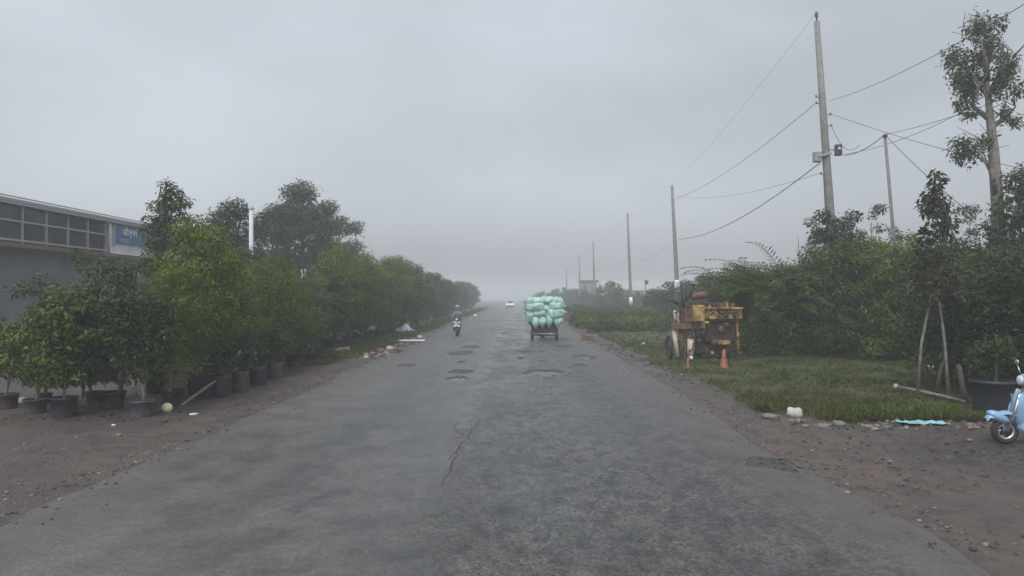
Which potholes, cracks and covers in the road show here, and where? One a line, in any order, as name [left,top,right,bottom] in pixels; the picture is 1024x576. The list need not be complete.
crack [442,420,498,484]
